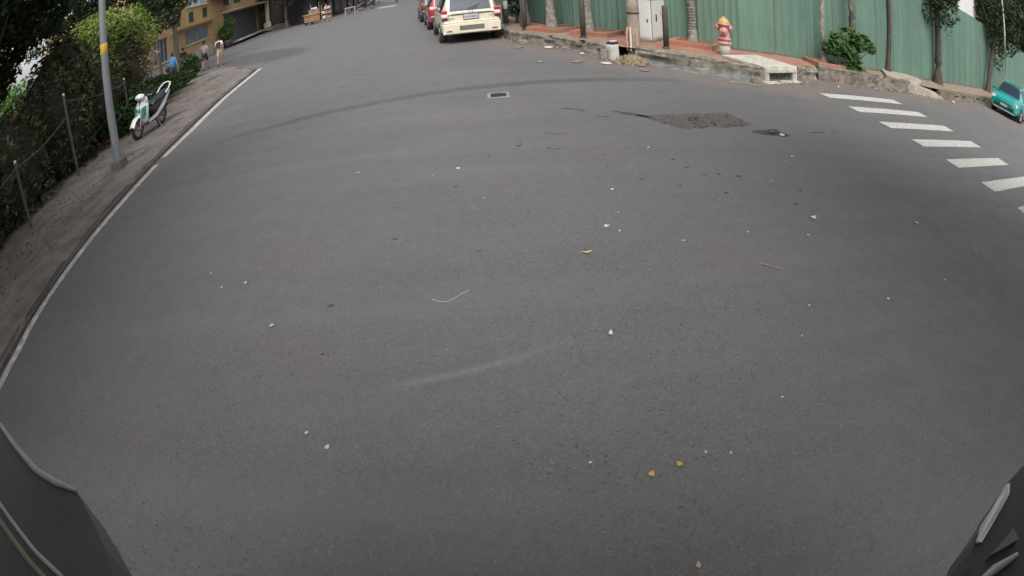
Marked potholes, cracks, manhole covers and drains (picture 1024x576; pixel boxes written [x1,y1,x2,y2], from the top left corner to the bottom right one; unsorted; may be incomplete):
pothole [635,113,752,130]
drain grate [722,55,801,84]
pothole [752,129,791,137]
